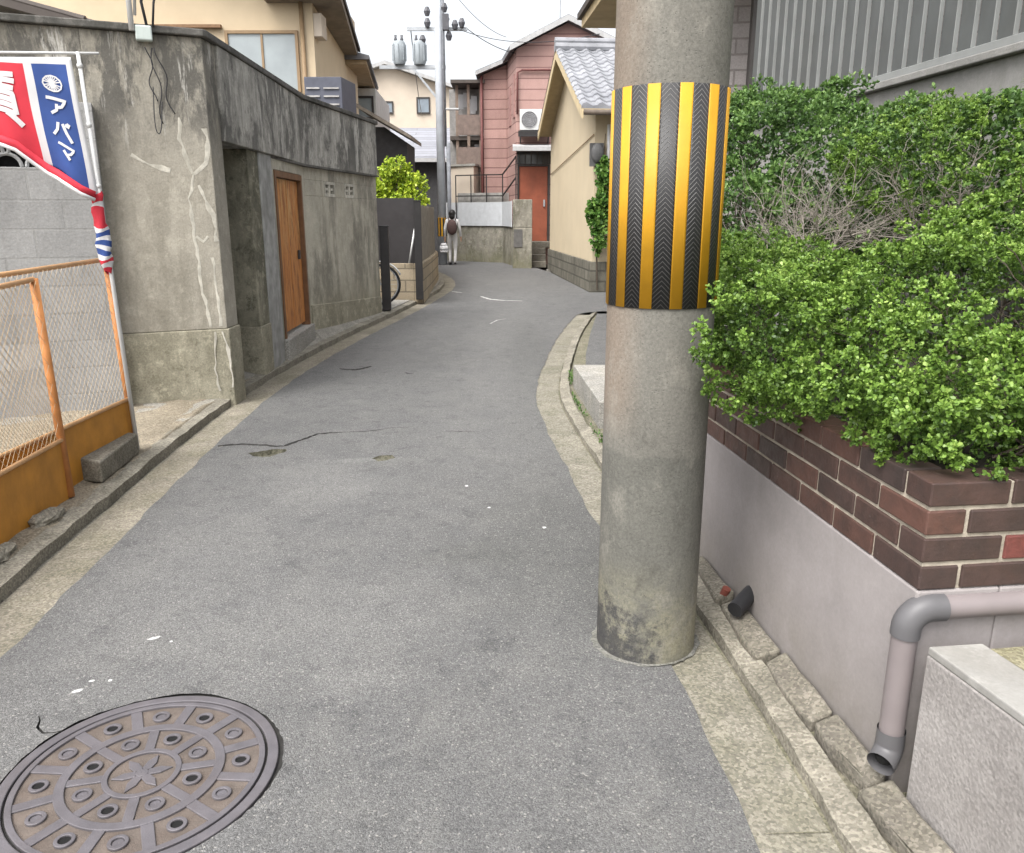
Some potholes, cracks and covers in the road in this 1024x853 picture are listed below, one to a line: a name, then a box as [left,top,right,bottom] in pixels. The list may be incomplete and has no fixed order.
crack [218,427,402,447]
crack [36,716,63,736]
pothole [249,449,287,457]
manhole cover [0,693,284,853]
